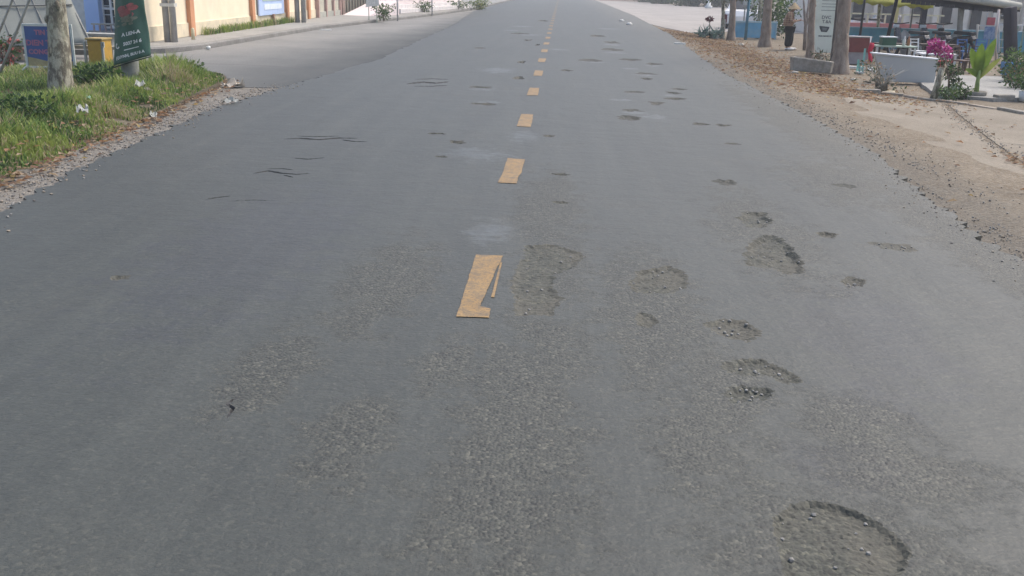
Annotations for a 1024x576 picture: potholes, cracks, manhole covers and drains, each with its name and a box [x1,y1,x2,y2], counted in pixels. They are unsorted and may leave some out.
pothole [627,265,689,294]
pothole [702,318,762,343]
pothole [841,276,867,288]
pothole [741,234,806,275]
pothole [509,244,586,317]
crack [253,158,318,177]
pothole [772,500,913,576]
pothole [867,242,918,252]
pothole [719,358,803,385]
pothole [721,385,776,404]
